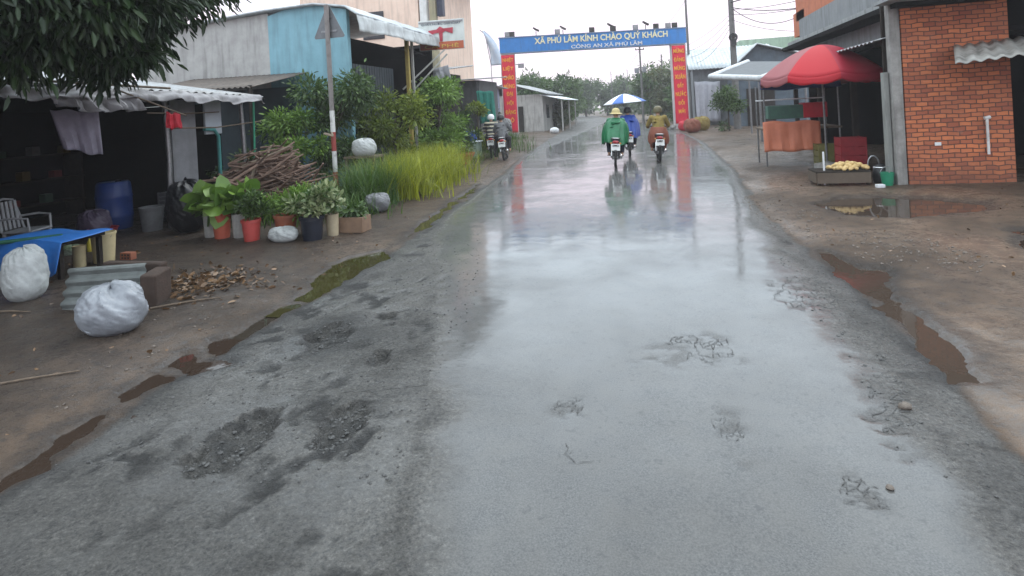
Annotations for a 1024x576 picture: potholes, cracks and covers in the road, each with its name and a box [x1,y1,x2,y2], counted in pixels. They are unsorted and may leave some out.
pothole [169,406,288,480]
crack [766,277,839,314]
crack [669,334,734,364]
pothole [293,320,360,352]
pothole [300,398,376,454]
crack [711,412,744,441]
crack [839,475,890,508]
pothole [363,349,395,367]
